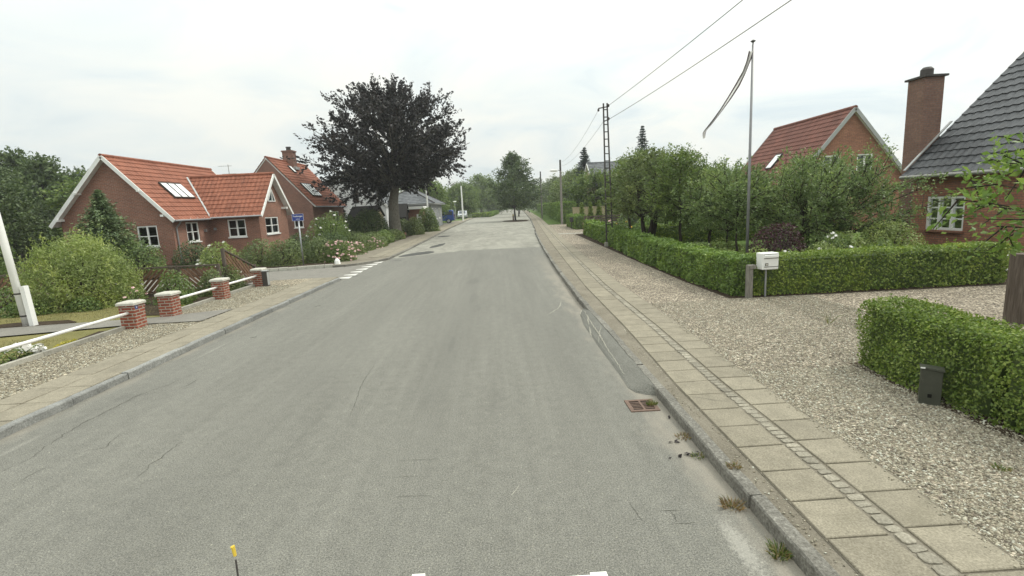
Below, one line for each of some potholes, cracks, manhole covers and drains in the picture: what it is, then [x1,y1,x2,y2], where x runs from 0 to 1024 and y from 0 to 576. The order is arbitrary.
drain grate [624,399,661,412]
